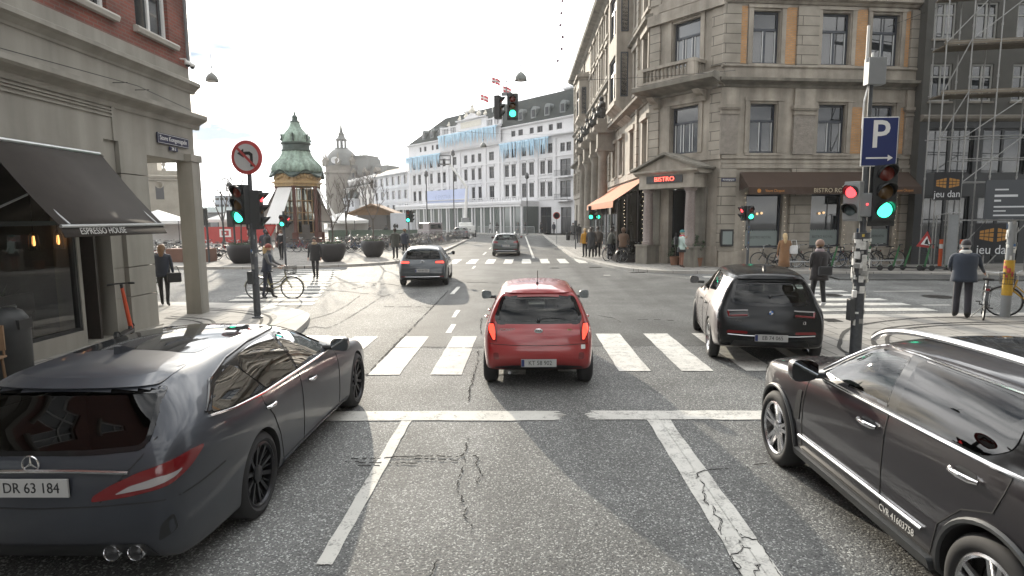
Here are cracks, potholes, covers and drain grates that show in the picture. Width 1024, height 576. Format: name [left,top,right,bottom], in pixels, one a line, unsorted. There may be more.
crack [696,463,781,576]
crack [345,439,483,529]
crack [468,318,482,401]
